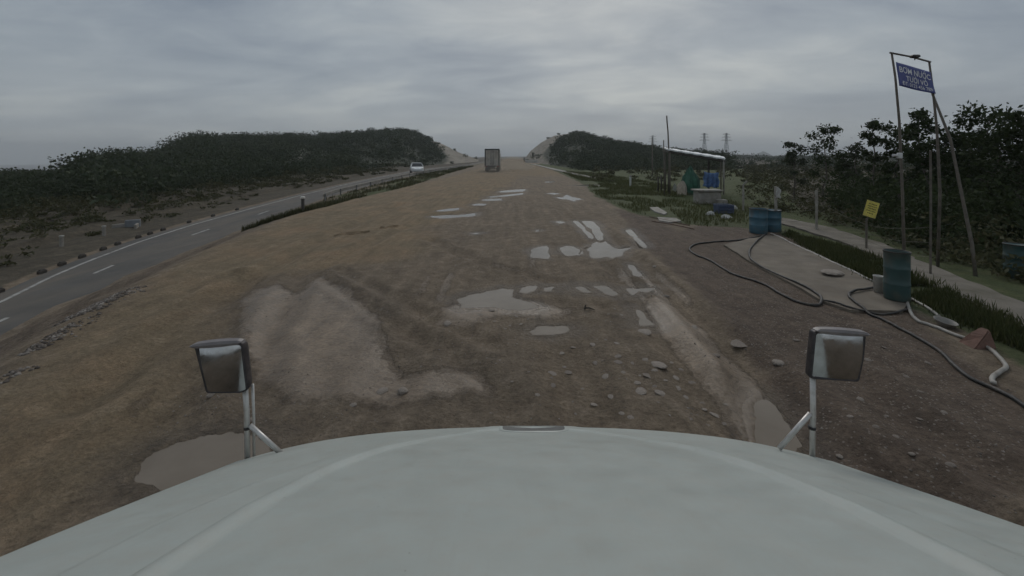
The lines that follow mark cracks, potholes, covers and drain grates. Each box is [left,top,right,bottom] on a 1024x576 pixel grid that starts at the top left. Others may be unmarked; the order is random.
pothole [541,285,559,293]
pothole [515,284,542,295]
pothole [113,424,288,499]
pothole [742,394,809,455]
pothole [450,286,545,312]
